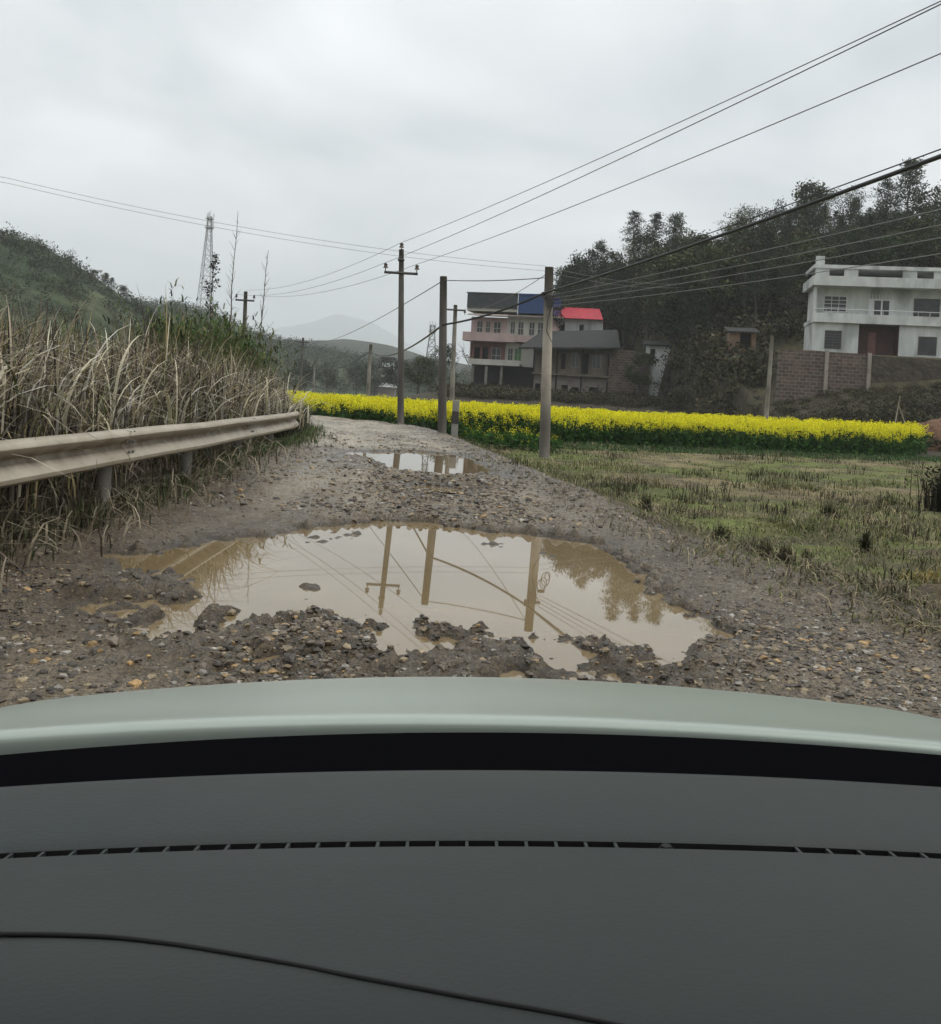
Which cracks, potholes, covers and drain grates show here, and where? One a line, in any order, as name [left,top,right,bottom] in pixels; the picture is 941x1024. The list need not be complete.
pothole [76,515,736,683]
pothole [345,448,494,475]
